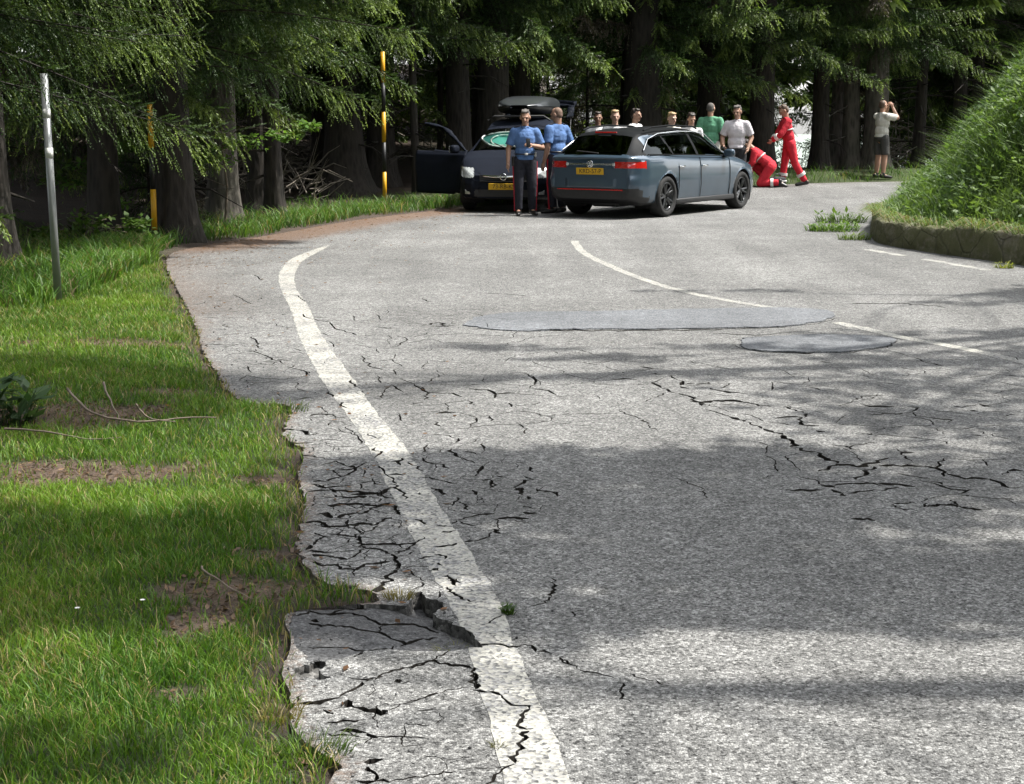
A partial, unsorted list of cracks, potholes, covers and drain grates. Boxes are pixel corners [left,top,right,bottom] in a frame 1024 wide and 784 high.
pothole [289,591,483,662]
crack [194,275,1023,784]
